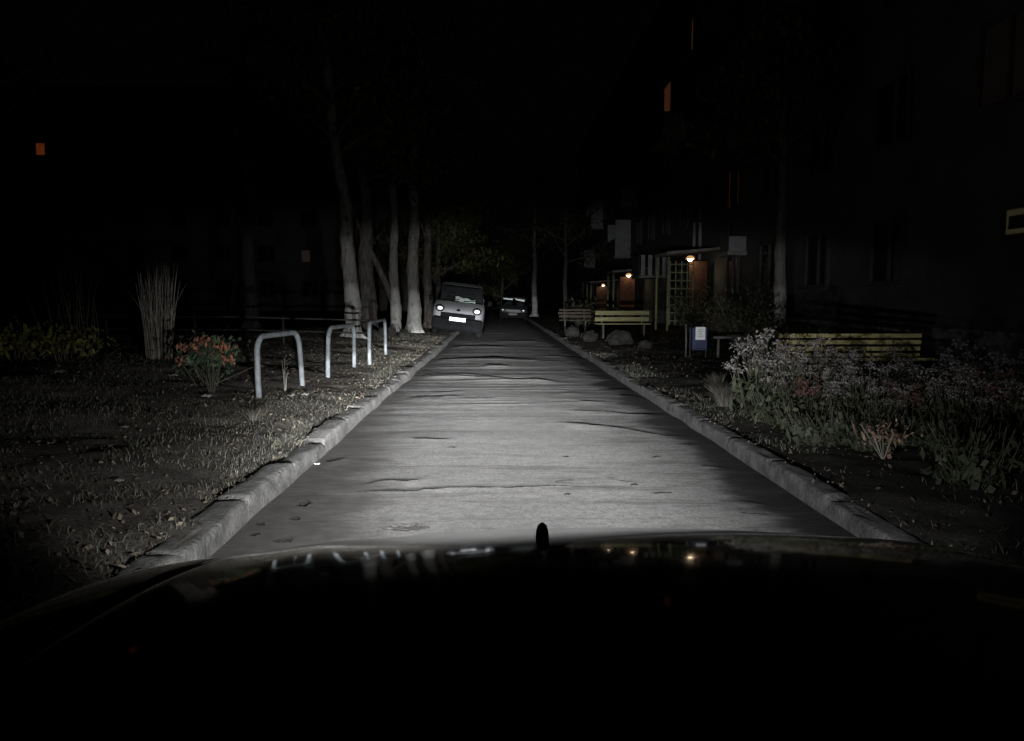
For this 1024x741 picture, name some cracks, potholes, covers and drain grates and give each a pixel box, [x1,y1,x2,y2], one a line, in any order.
crack [577,389,676,436]
crack [370,479,583,492]
crack [431,346,564,393]
